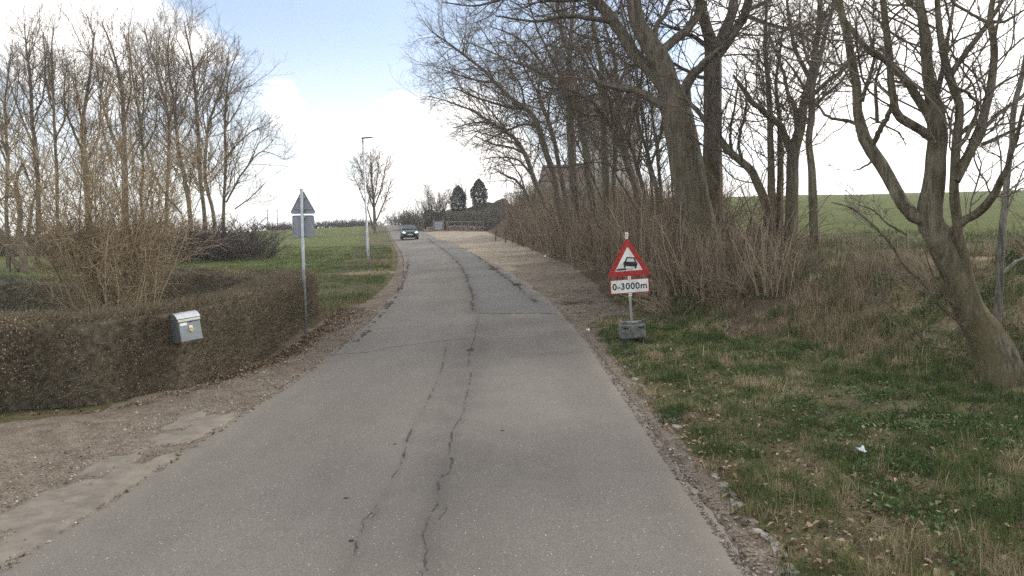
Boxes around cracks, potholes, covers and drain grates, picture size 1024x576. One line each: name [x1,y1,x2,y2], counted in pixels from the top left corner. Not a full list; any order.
crack [333,261,479,575]
